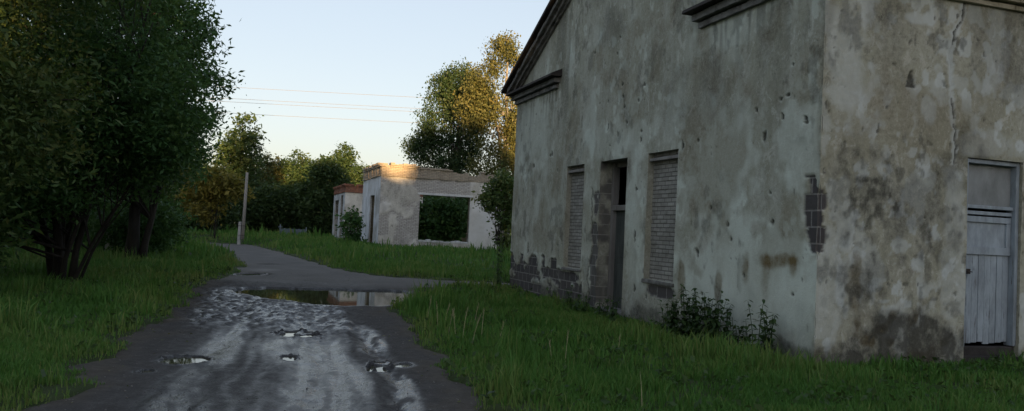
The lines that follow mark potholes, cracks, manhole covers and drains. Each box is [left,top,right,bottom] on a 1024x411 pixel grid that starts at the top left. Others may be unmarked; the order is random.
pothole [361,360,397,373]
pothole [276,353,303,362]
pothole [152,354,213,366]
pothole [228,286,416,307]
pothole [267,328,325,338]
